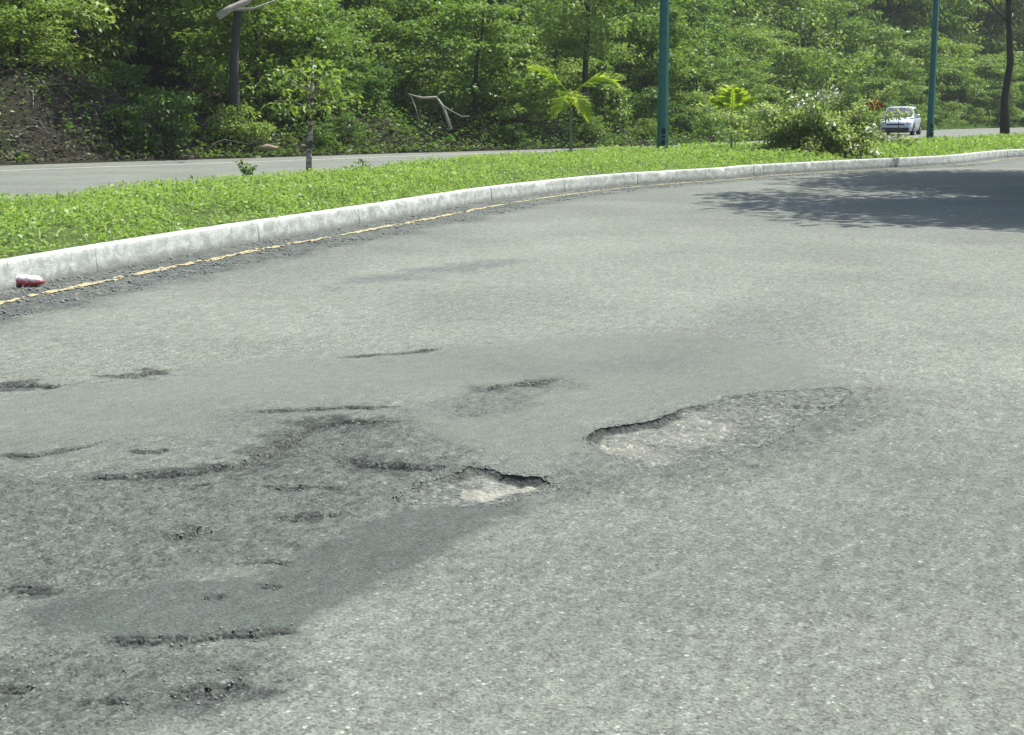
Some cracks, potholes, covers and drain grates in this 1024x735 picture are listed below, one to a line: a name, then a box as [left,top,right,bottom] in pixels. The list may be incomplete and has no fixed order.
pothole [398,466,551,506]
pothole [586,387,852,469]
